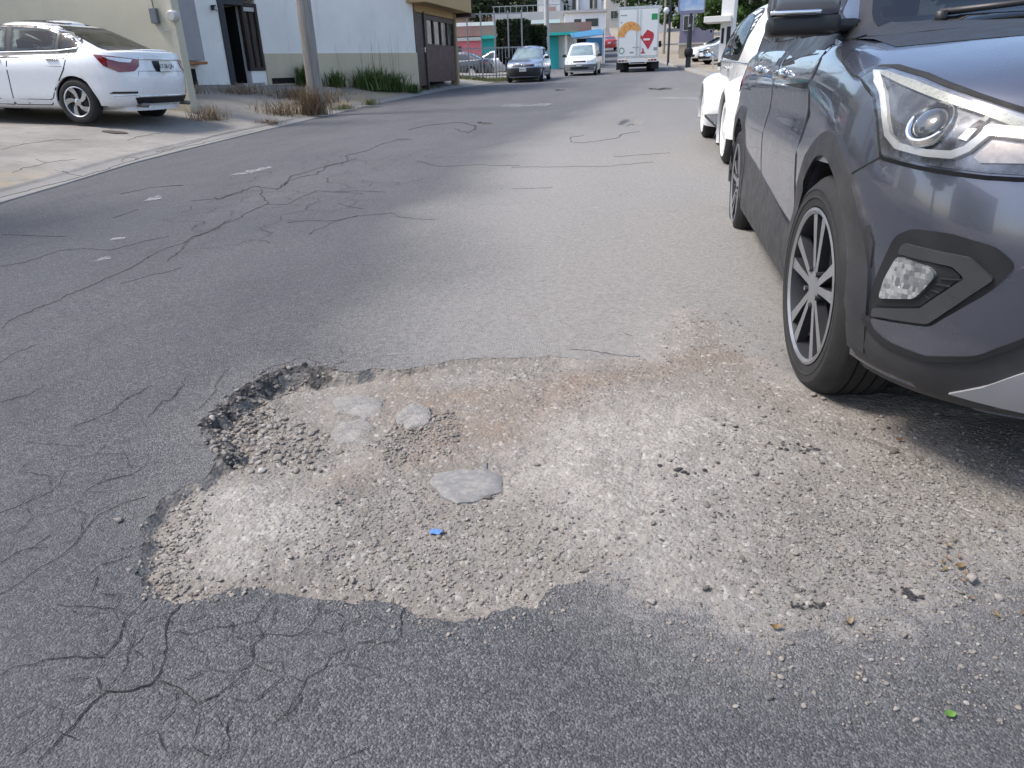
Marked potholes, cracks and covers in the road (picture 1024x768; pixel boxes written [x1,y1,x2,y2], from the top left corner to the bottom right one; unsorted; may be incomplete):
crack [567,131,660,167]
crack [74,376,188,426]
crack [0,438,407,768]
pothole [135,356,665,623]
crack [2,140,519,324]
